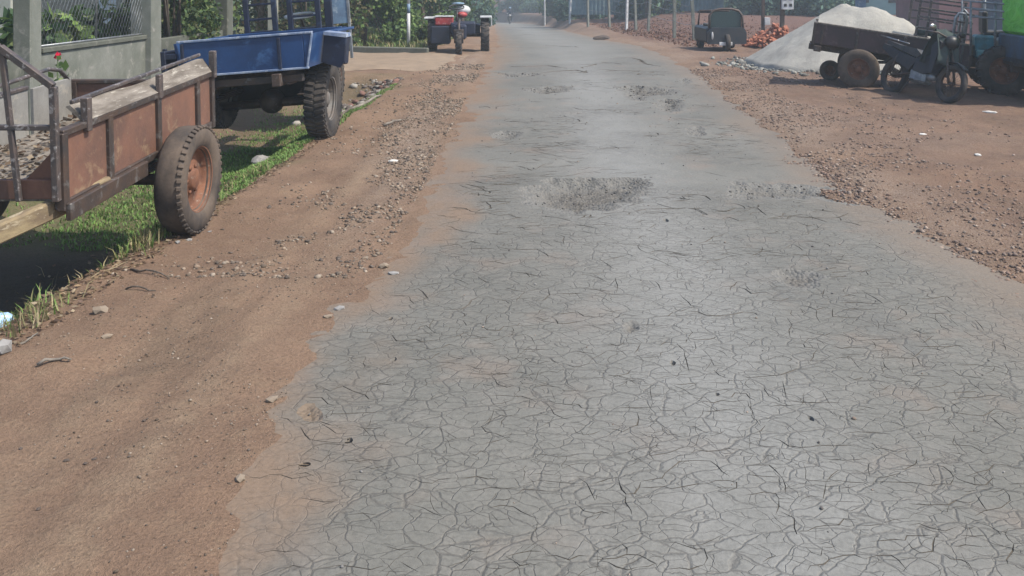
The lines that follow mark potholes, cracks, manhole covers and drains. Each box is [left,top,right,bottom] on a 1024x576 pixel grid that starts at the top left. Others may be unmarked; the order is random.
pothole [615,85,682,101]
pothole [718,180,857,206]
pothole [652,98,685,113]
pothole [488,130,524,140]
pothole [517,176,658,215]
crack [284,34,1022,576]
crack [253,381,395,483]
pothole [524,85,575,94]
